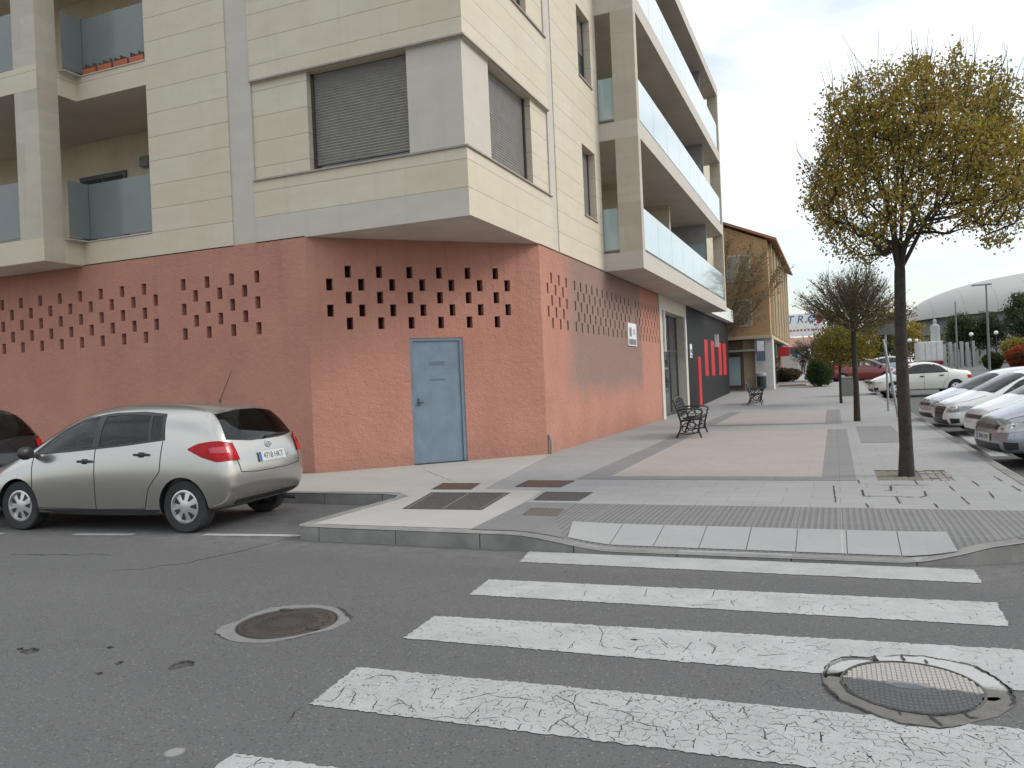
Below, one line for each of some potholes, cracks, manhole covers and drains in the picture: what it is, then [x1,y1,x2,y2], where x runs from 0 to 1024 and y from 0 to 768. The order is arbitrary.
pothole [168,660,195,670]
manhole cover [822,655,1014,729]
manhole cover [215,604,351,643]
crack [116,541,280,571]
